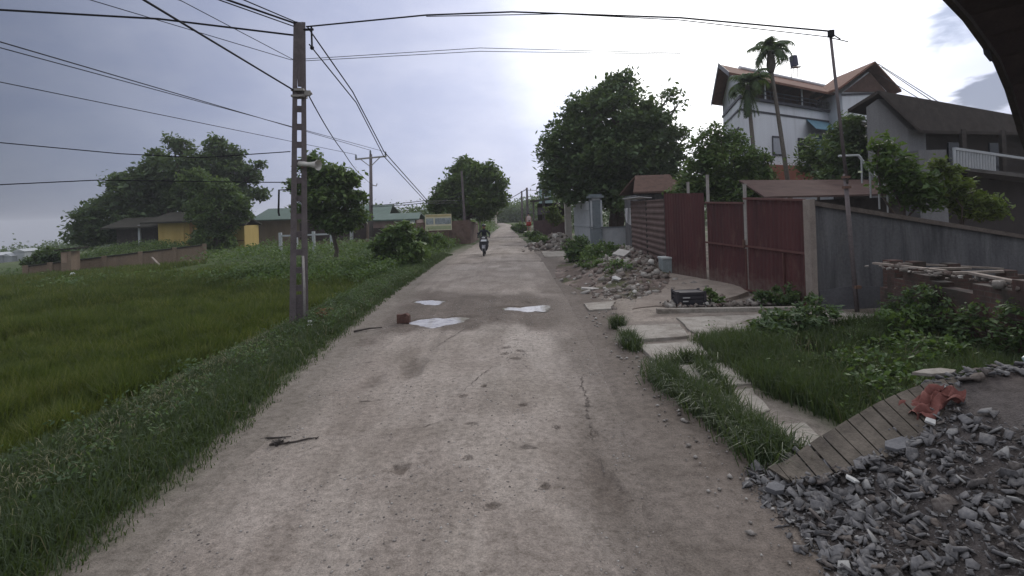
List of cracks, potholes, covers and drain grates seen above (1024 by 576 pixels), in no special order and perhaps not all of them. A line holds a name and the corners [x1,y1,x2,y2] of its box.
crack [580,374,598,442]
